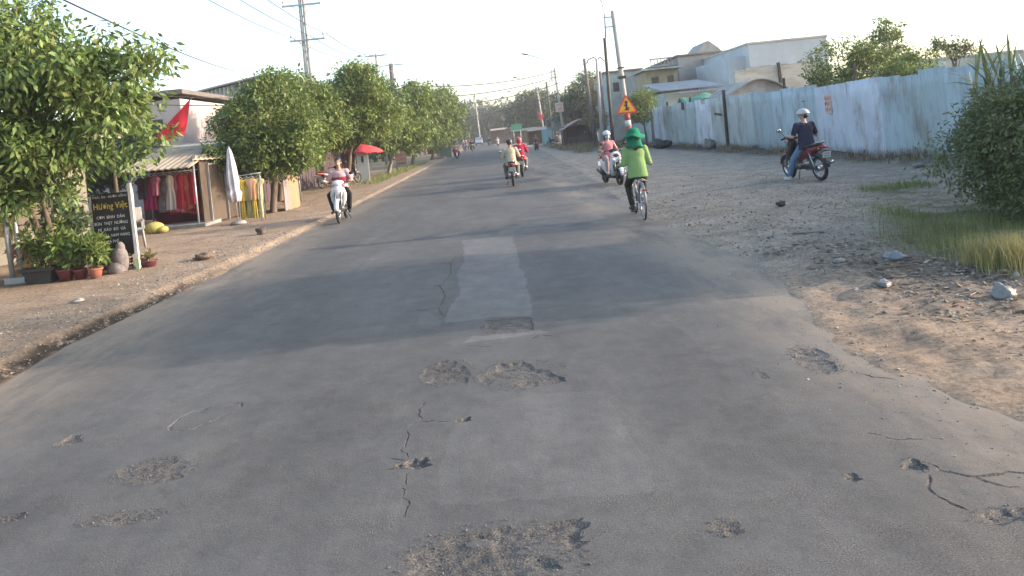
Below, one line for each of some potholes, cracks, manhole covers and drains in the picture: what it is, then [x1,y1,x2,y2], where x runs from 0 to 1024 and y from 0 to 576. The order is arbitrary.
pothole [77,509,162,527]
pothole [476,361,566,388]
crack [415,256,456,317]
pothole [844,472,862,482]
pothole [395,457,432,469]
pothole [0,512,27,523]
pothole [704,519,745,537]
pothole [902,457,930,472]
pothole [115,457,191,484]
pothole [419,360,471,384]
pothole [790,347,839,375]
pothole [970,507,1024,526]
